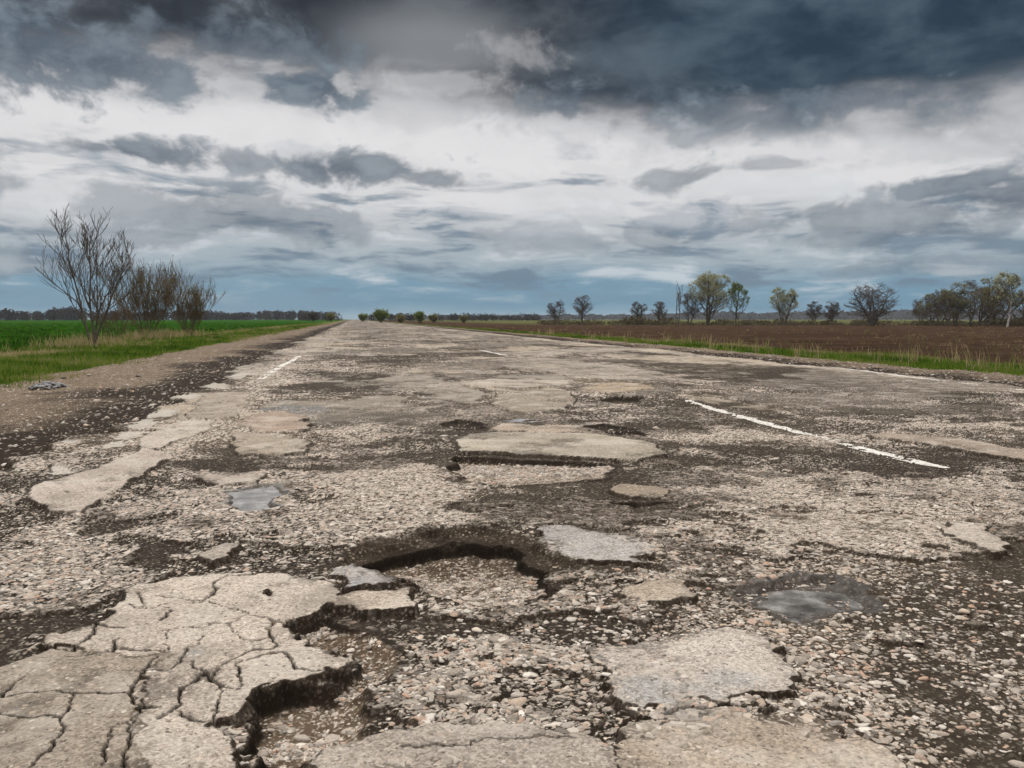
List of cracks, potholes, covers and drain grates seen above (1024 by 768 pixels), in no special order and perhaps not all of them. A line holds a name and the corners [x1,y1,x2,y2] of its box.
pothole [580,423,650,436]
pothole [436,418,491,432]
pothole [359,541,561,608]
pothole [217,482,292,512]
pothole [594,394,649,404]
crack [0,573,334,768]
pothole [227,605,414,768]
pothole [723,570,887,629]
